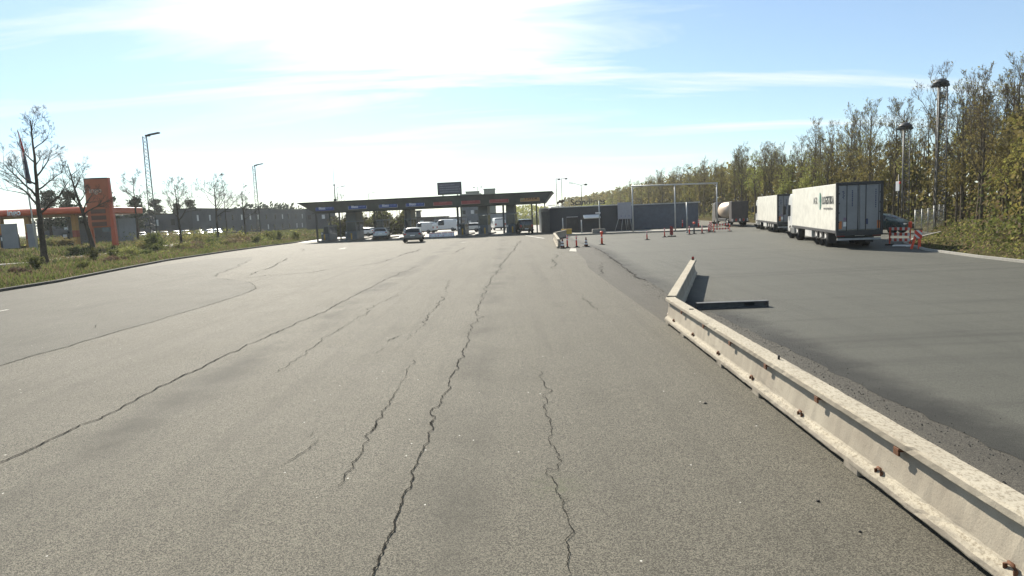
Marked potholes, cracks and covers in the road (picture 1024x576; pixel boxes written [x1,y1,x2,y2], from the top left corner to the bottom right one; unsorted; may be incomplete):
crack [531,366,575,570]
crack [593,247,646,280]
crack [6,249,420,364]
crack [338,241,520,576]
crack [0,267,414,462]
